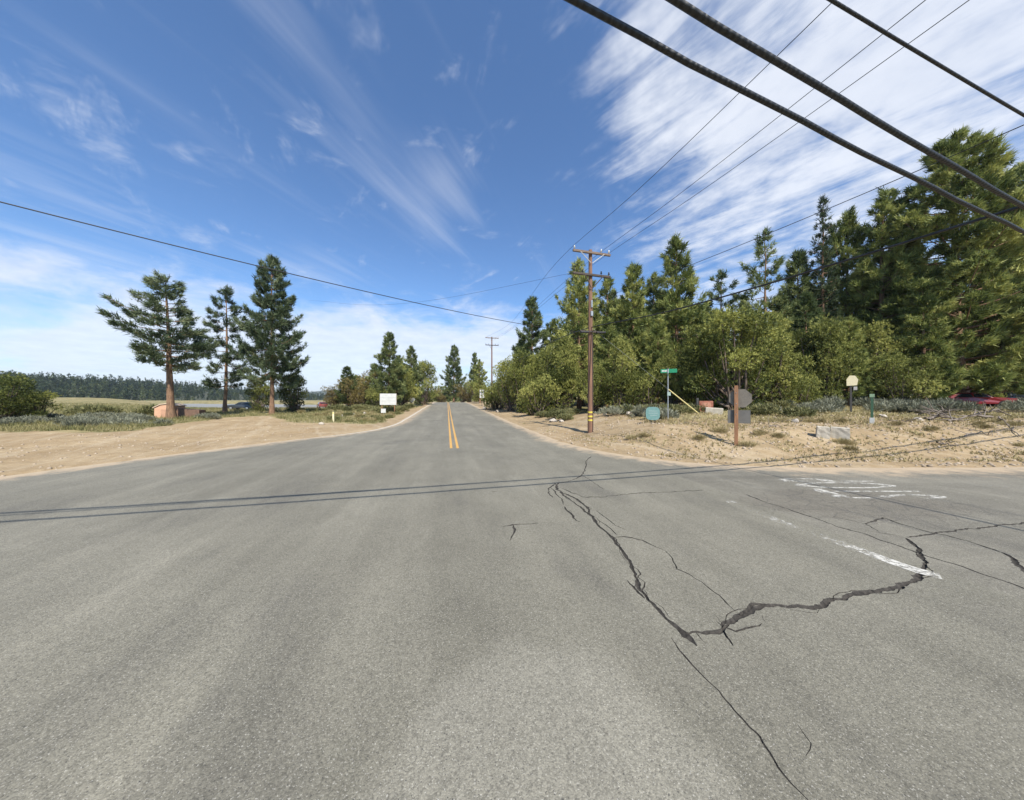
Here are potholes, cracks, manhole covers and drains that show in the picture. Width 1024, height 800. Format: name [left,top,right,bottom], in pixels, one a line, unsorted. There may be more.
crack [503,457,1024,800]
